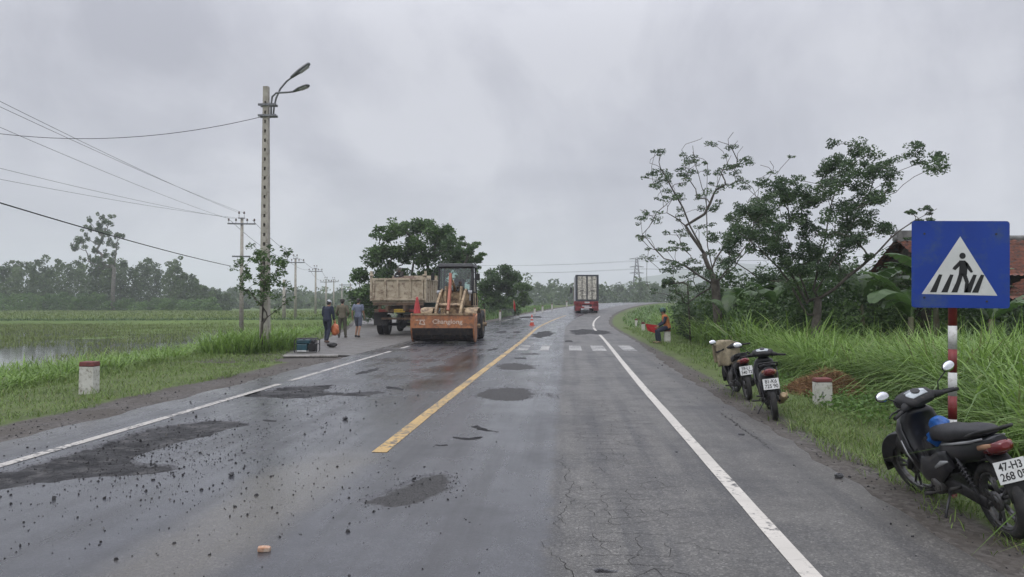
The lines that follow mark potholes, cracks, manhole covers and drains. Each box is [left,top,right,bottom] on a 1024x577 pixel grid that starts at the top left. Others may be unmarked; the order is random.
crack [553,401,725,577]
